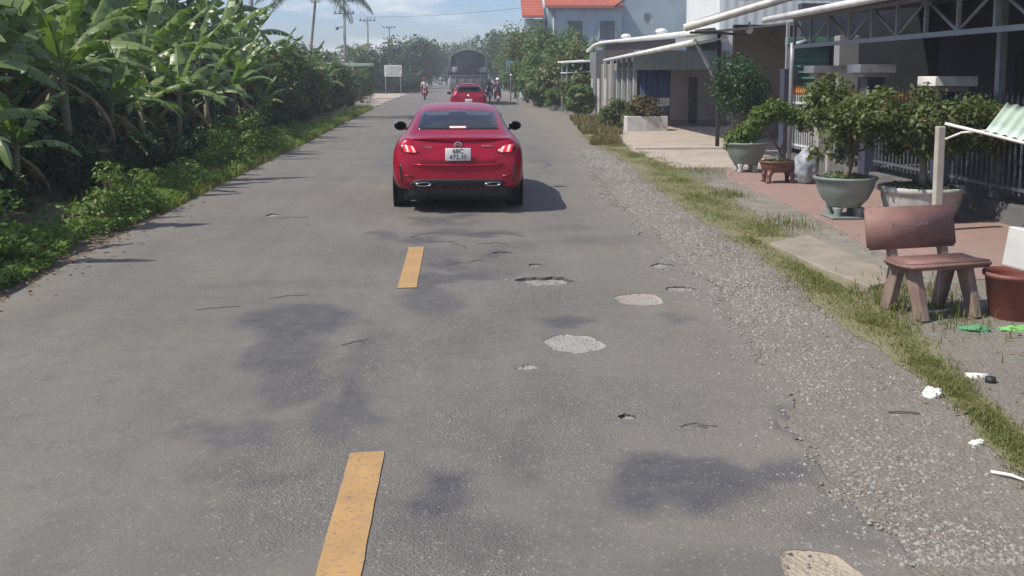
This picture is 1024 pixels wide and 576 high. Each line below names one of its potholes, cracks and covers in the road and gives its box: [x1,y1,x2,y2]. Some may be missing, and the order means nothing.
pothole [505,276,578,287]
crack [410,232,524,265]
